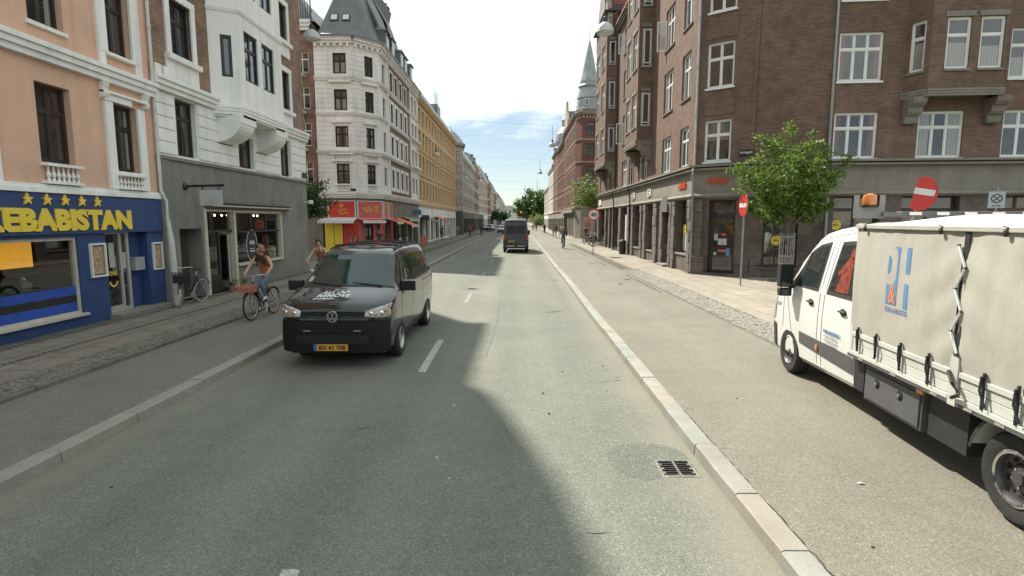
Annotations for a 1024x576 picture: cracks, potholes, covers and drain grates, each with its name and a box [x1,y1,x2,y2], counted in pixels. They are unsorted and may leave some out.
drain grate [654,460,702,478]
